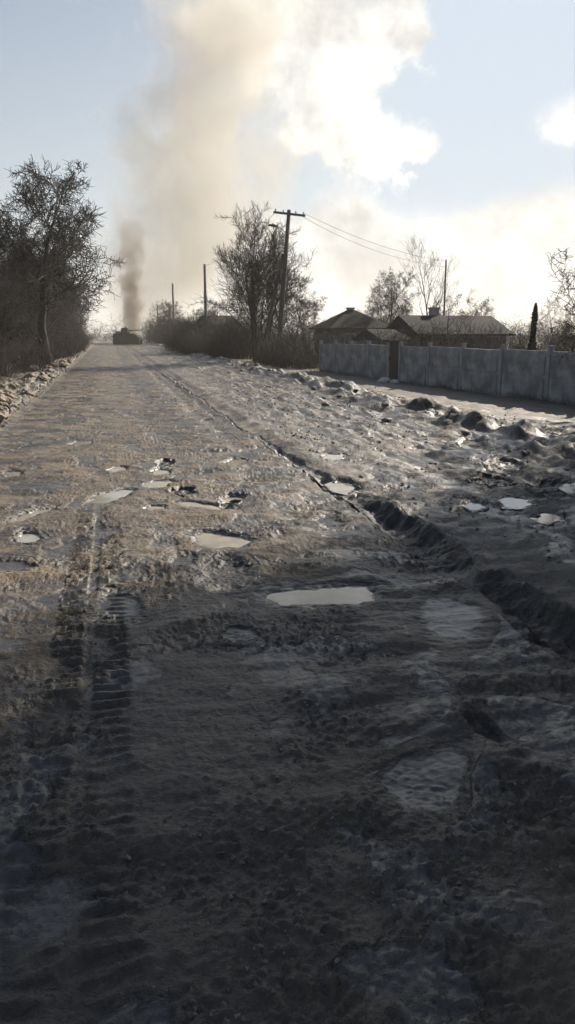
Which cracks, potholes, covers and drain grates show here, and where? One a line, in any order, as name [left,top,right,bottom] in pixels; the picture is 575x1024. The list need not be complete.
pothole [11,529,43,545]
pothole [248,580,394,610]
pothole [179,529,259,551]
pothole [105,465,127,474]
pothole [217,493,248,504]
pothole [458,498,489,513]
pothole [349,725,486,831]
pothole [149,467,172,475]
pothole [401,581,502,653]
pothole [322,476,361,496]
pothole [495,494,541,511]
